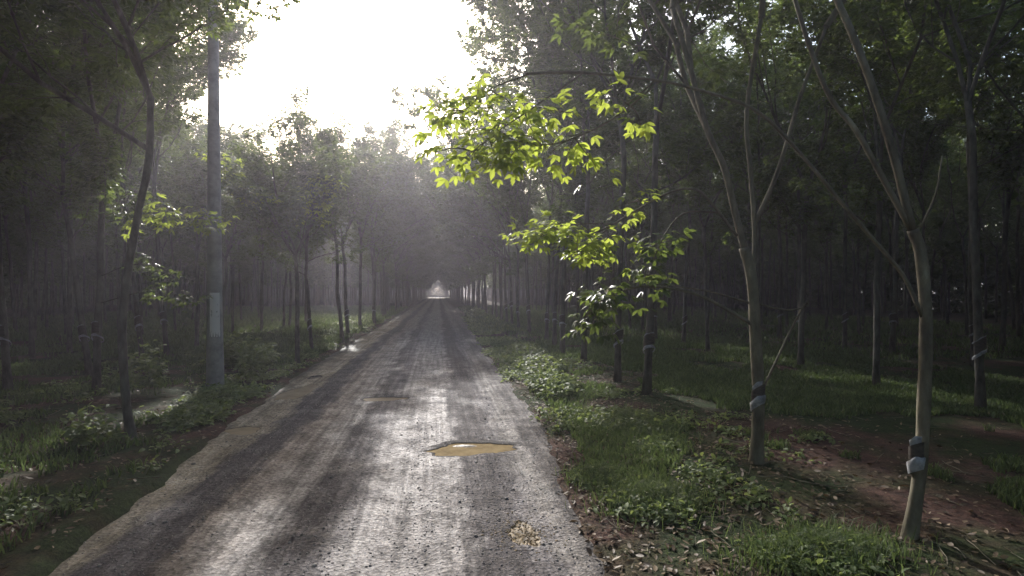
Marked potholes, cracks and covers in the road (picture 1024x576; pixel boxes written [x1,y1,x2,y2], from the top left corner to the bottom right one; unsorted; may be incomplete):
pothole [414,440,528,459]
